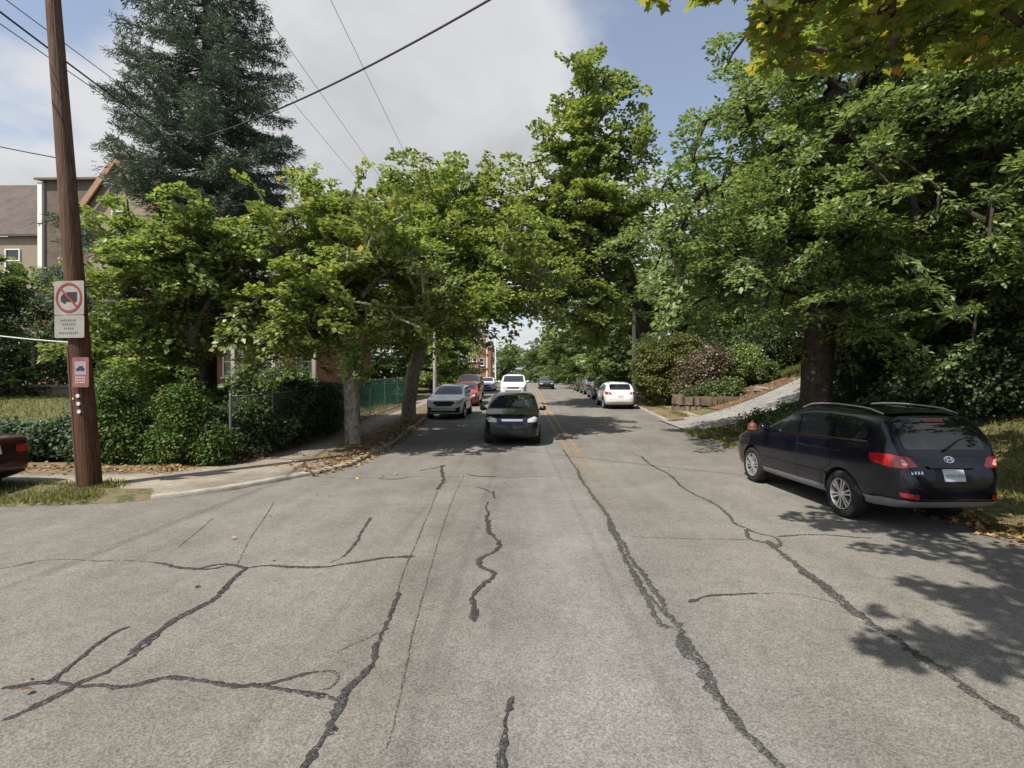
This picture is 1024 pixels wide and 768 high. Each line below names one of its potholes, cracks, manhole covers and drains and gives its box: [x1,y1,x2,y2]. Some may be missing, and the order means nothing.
crack [688,592,837,603]
